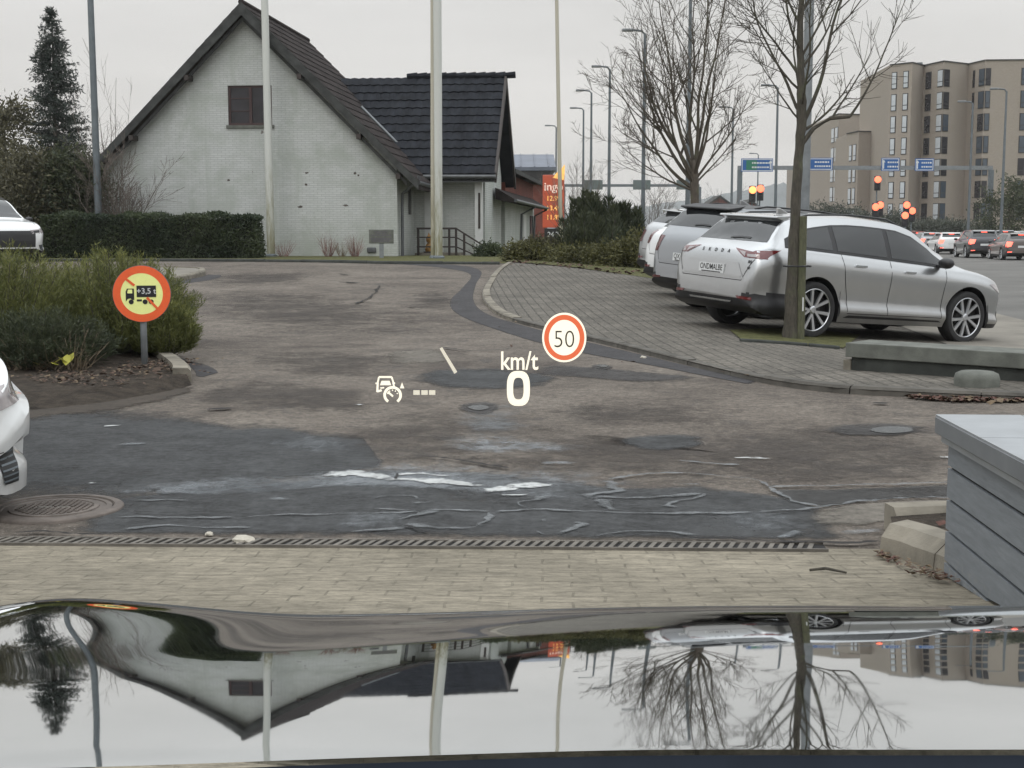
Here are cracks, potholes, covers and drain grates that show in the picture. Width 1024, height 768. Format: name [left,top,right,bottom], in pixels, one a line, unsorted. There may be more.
manhole cover [0,494,124,525]
crack [21,460,948,544]
